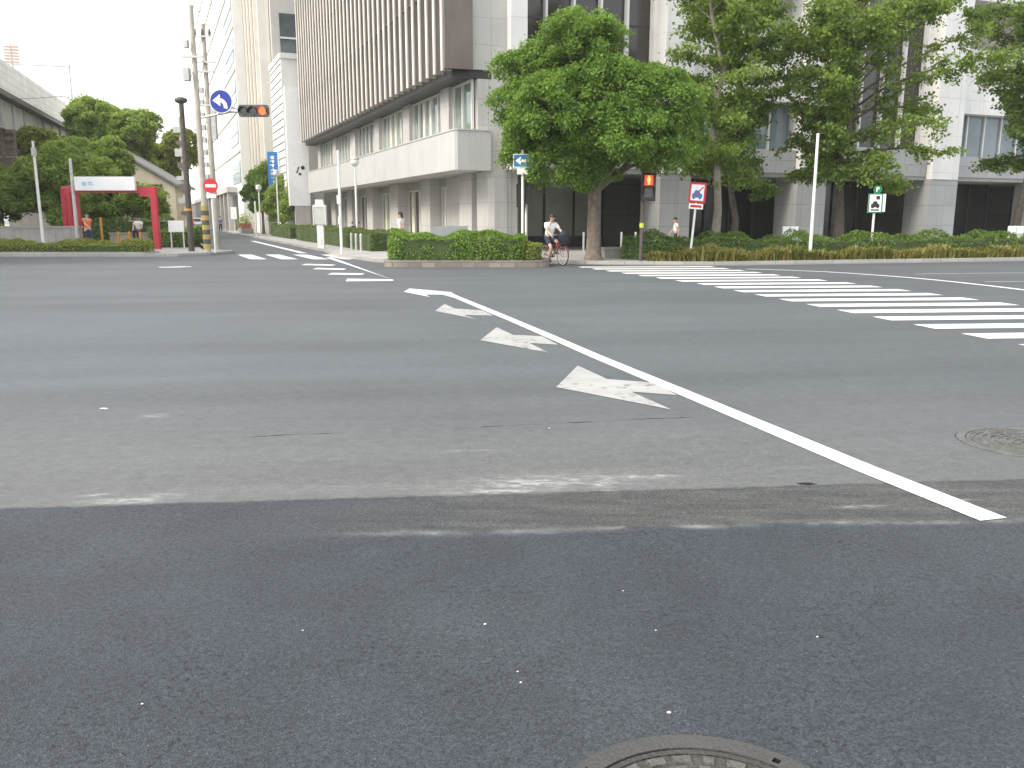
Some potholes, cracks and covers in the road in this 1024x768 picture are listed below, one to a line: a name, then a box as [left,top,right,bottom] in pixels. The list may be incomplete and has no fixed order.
manhole cover [573,735,810,768]
manhole cover [956,427,1024,458]
crack [484,417,690,427]
